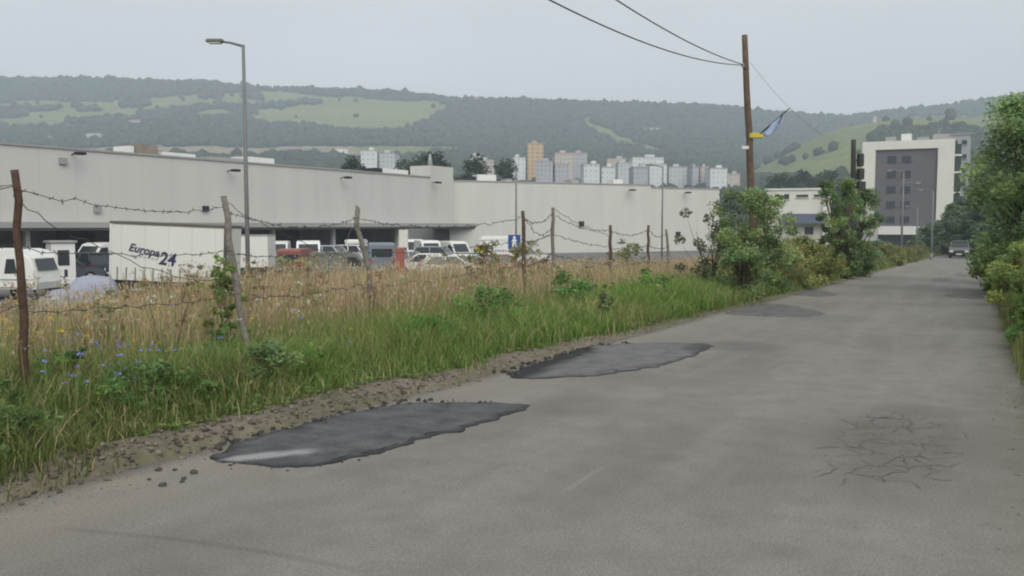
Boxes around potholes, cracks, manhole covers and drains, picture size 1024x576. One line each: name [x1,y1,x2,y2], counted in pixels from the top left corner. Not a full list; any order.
crack [808,413,967,488]
